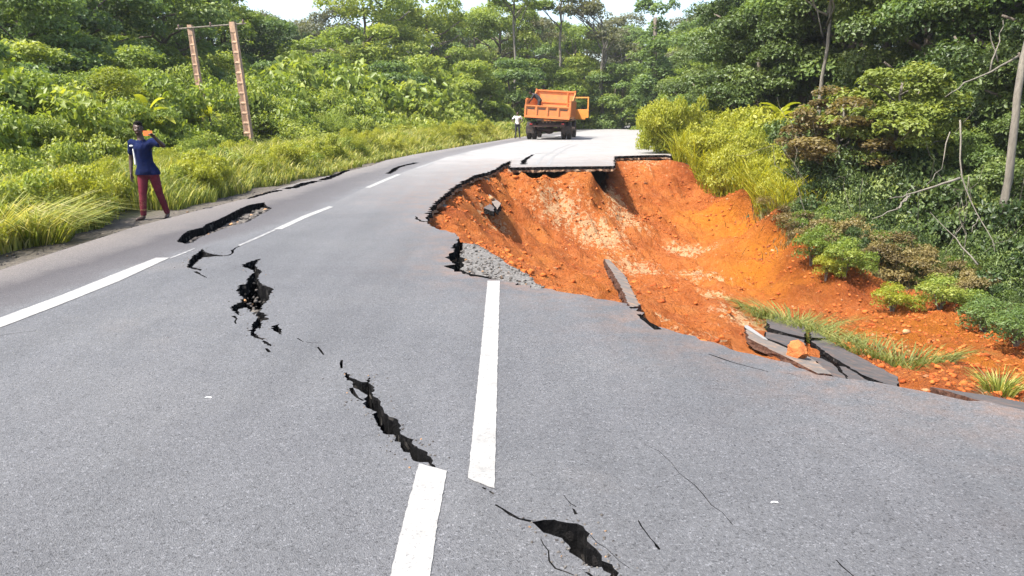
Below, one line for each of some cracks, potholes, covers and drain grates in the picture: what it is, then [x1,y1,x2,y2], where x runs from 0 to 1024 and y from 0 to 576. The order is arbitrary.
crack [520,153,546,165]
crack [317,347,435,467]
crack [482,487,660,576]
crack [645,444,733,525]
crack [186,245,242,278]
crack [386,163,416,174]
